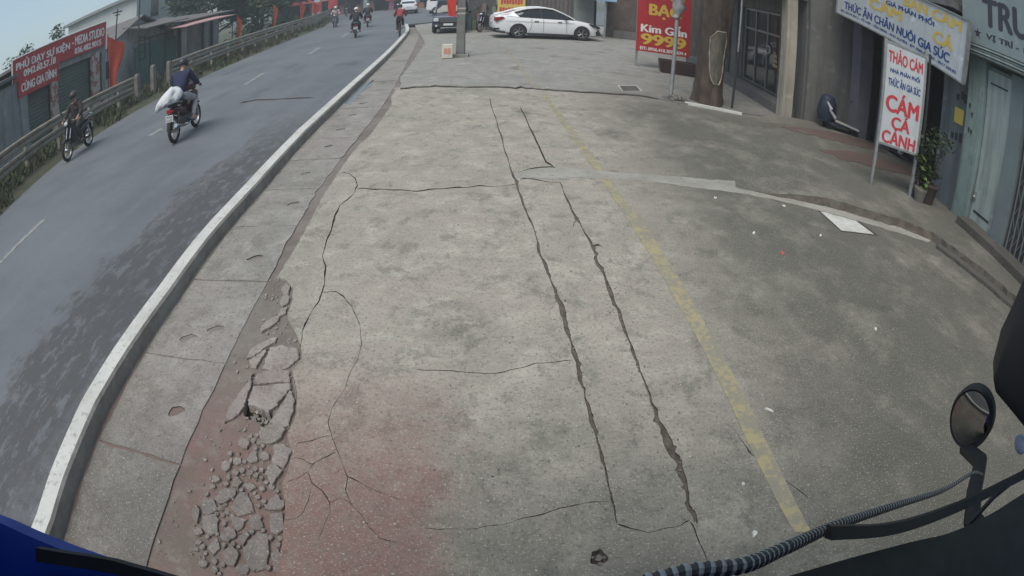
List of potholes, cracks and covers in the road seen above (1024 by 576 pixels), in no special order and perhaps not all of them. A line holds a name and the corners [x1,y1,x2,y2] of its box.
pothole [243,401,273,427]
manhole cover [818,210,877,235]
crack [192,86,707,576]
pothole [590,549,609,566]
